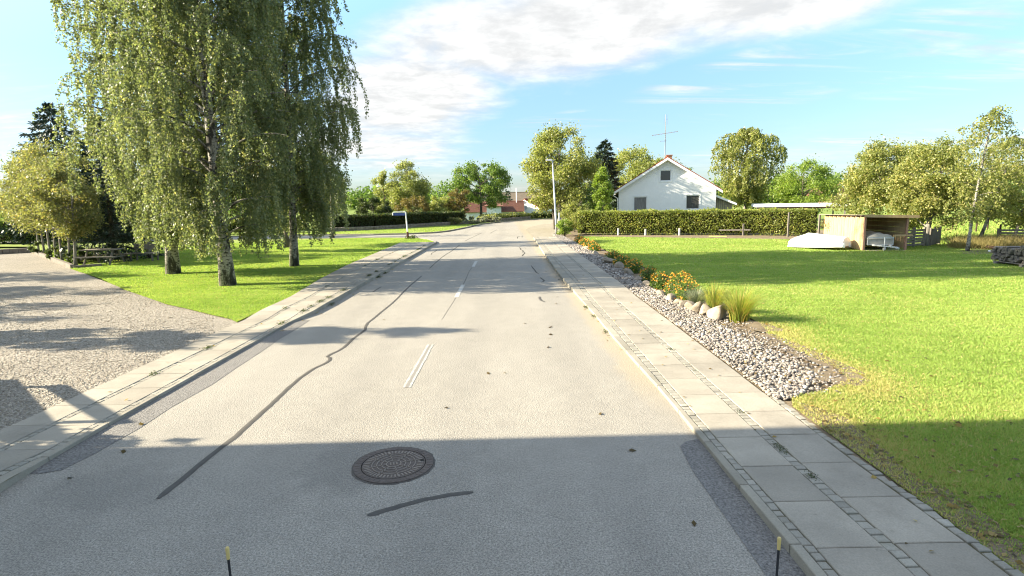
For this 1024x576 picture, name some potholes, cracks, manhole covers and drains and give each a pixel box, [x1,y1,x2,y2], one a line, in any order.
manhole cover [351,447,435,485]
